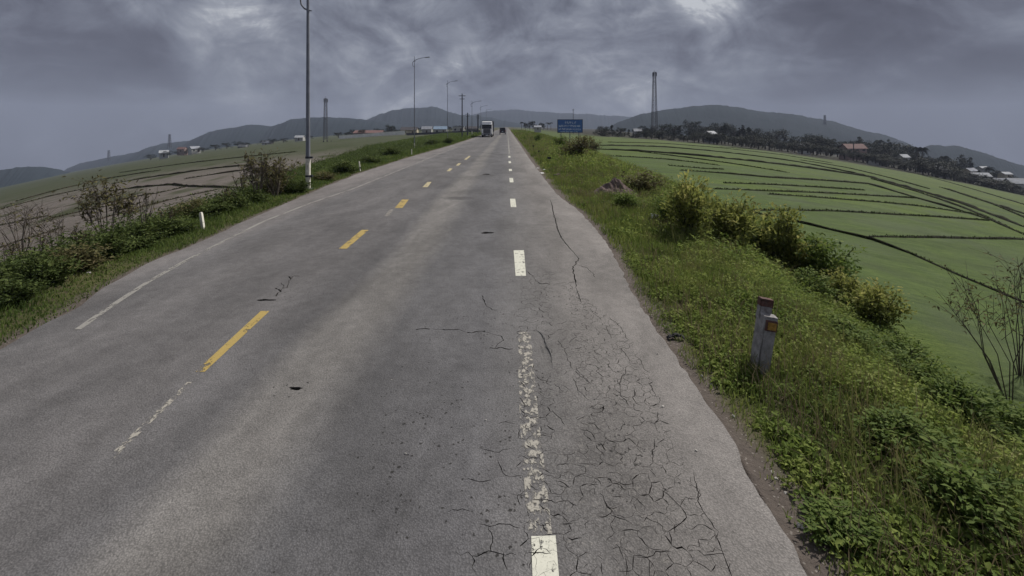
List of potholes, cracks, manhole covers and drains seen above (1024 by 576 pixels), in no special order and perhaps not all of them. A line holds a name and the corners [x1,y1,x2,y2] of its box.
crack [528,201,595,303]
crack [416,328,510,350]
crack [450,272,732,576]
